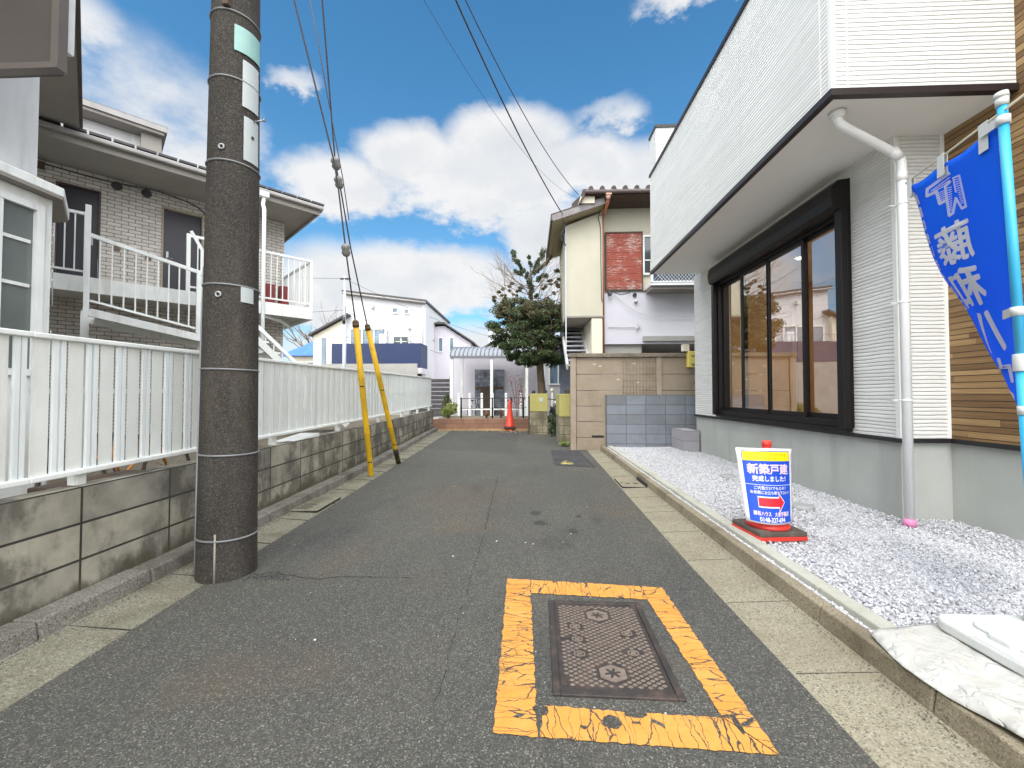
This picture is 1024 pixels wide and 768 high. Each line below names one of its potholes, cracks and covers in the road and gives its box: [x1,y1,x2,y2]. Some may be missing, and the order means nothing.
manhole cover [550,450,595,467]
crack [259,571,416,580]
manhole cover [548,600,687,702]
